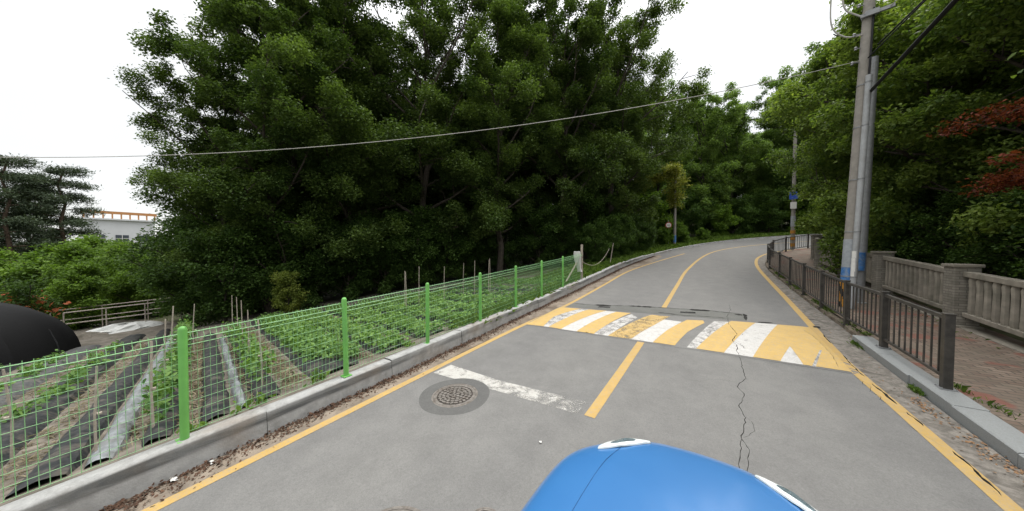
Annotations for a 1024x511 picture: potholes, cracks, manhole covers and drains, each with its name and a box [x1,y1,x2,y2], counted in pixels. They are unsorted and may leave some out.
manhole cover [419,379,490,415]
crack [953,452,1001,495]
crack [727,305,755,472]
